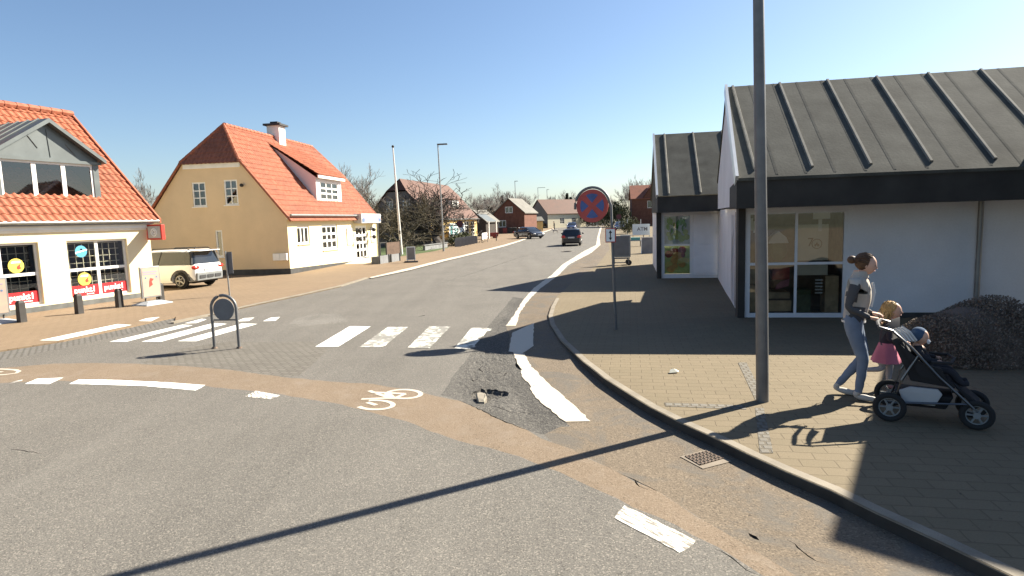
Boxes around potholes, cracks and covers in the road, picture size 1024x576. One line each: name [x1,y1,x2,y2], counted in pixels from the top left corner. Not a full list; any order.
pothole [471,388,509,402]
drain grate [680,450,731,469]
